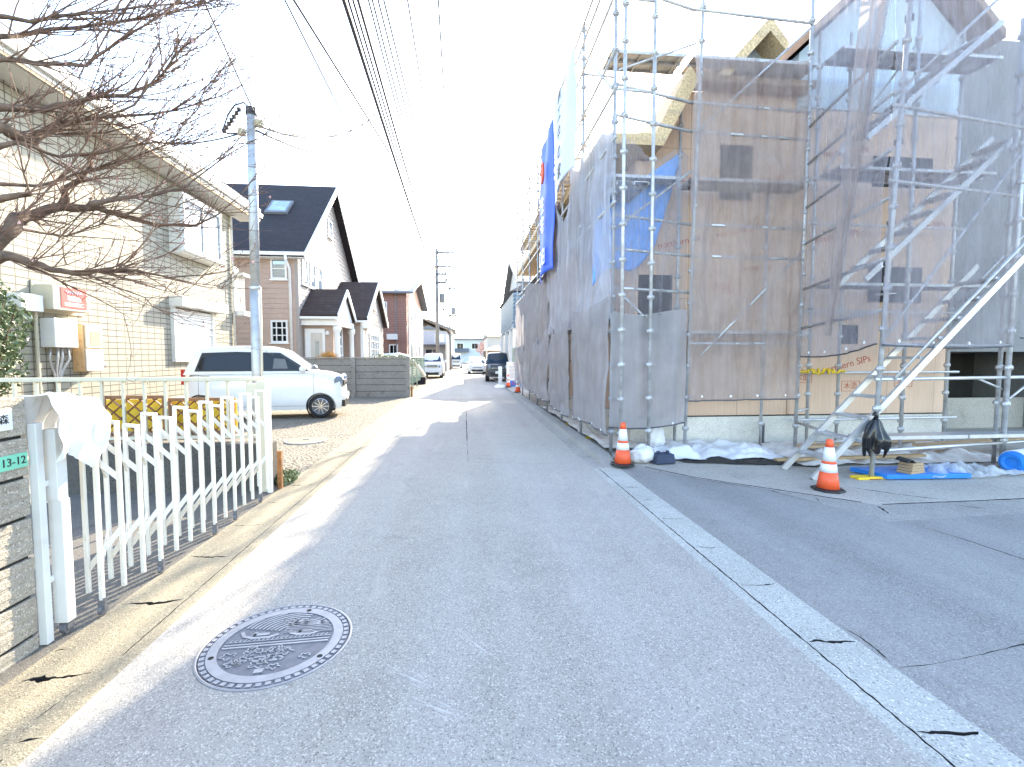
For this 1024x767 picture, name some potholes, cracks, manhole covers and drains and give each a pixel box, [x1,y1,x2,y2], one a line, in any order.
crack [23,672,92,719]
manhole cover [193,604,352,692]
manhole cover [284,437,327,445]
